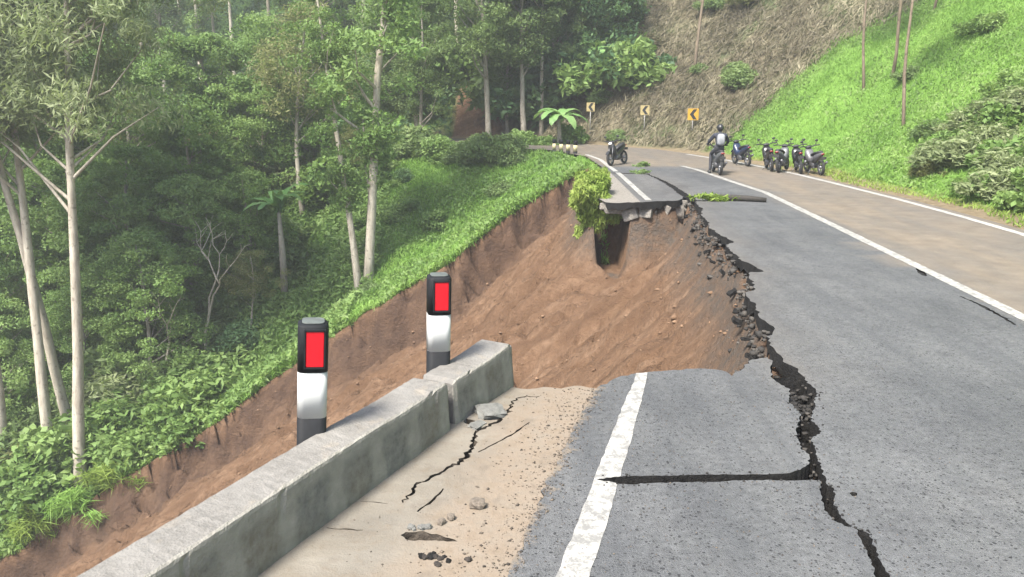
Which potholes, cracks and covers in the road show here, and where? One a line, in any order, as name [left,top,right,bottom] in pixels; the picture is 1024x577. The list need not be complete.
crack [960,296,1016,325]
crack [598,375,890,577]
crack [402,396,539,512]
